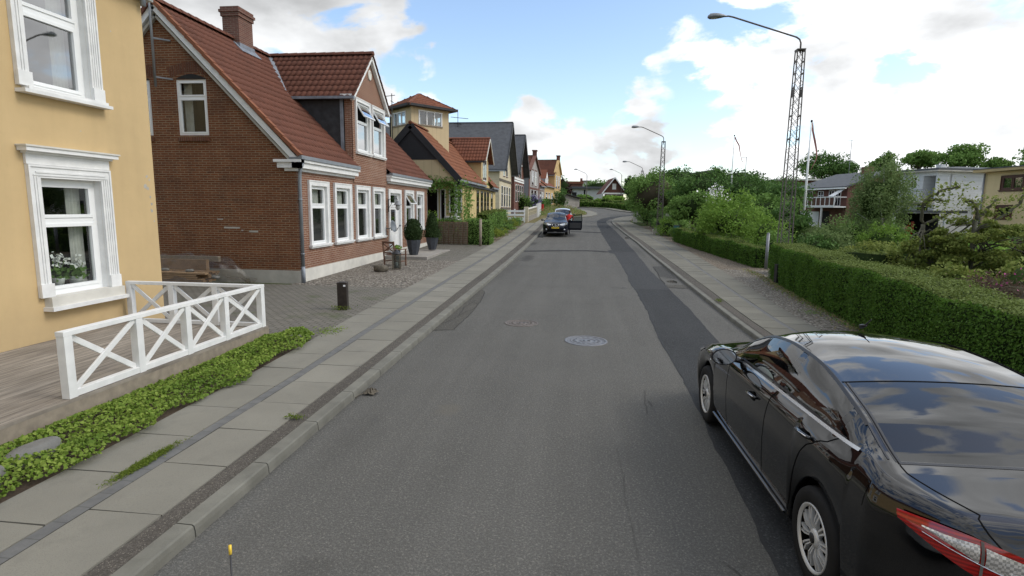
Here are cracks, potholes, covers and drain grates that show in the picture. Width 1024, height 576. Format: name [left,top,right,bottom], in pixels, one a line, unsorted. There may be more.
manhole cover [564,336,608,346]
